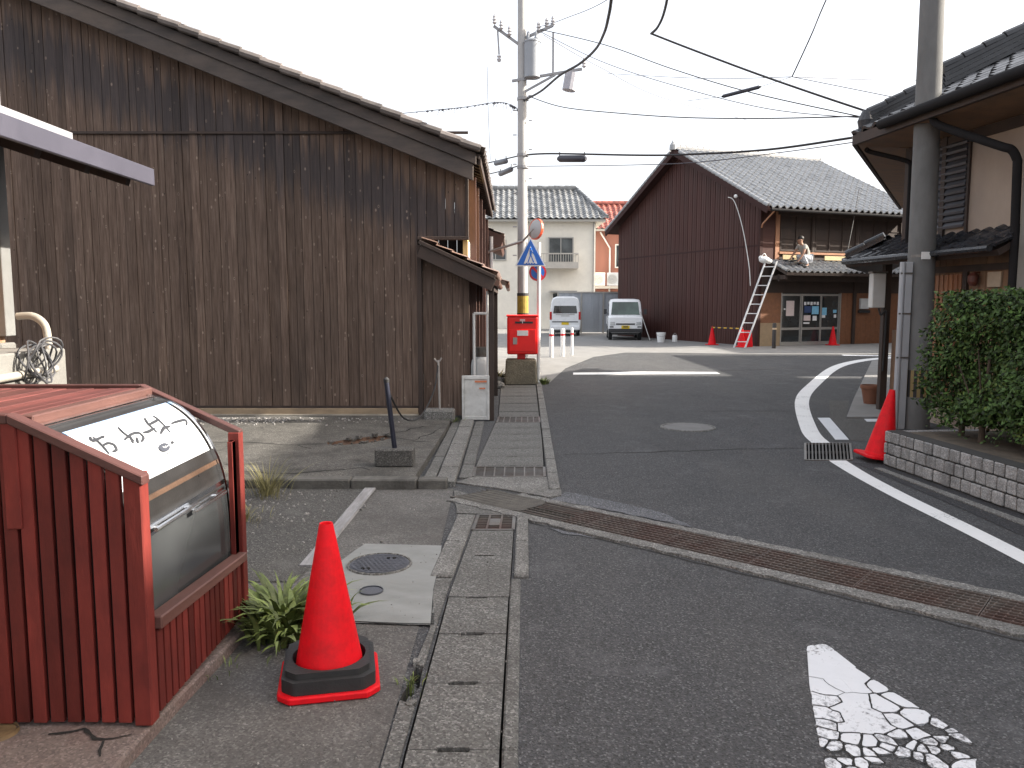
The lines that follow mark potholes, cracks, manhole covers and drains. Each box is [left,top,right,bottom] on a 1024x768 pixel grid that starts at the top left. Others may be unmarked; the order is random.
drain grate [471,514,516,532]
manhole cover [347,553,412,575]
crack [48,728,131,757]
manhole cover [660,422,716,432]
drain grate [496,416,541,424]
manhole cover [359,585,383,596]
drain grate [804,443,853,461]
drain grate [472,466,546,477]
